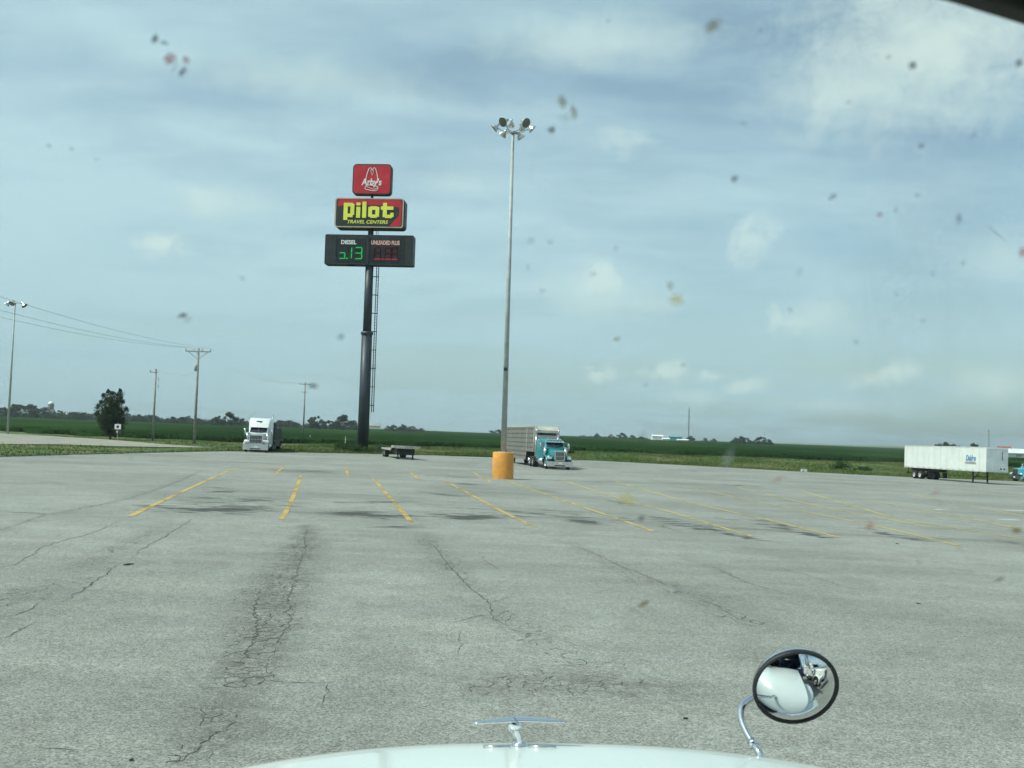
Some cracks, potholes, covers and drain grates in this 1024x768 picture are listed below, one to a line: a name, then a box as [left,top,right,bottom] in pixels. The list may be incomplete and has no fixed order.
crack [215,526,340,705]
crack [2,520,190,637]
crack [165,704,248,766]
crack [568,544,764,626]
crack [419,538,519,632]
